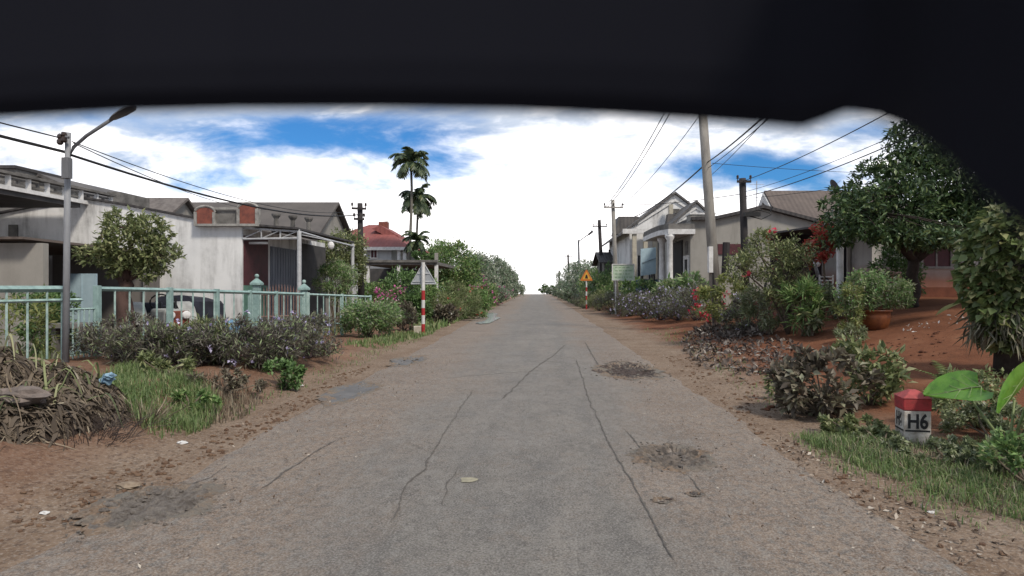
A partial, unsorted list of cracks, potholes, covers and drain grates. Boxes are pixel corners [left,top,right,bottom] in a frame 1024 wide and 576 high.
crack [389,392,472,523]
pothole [622,442,723,475]
crack [502,343,709,564]
pothole [650,496,676,504]
pothole [585,360,675,383]
crack [261,437,344,489]
